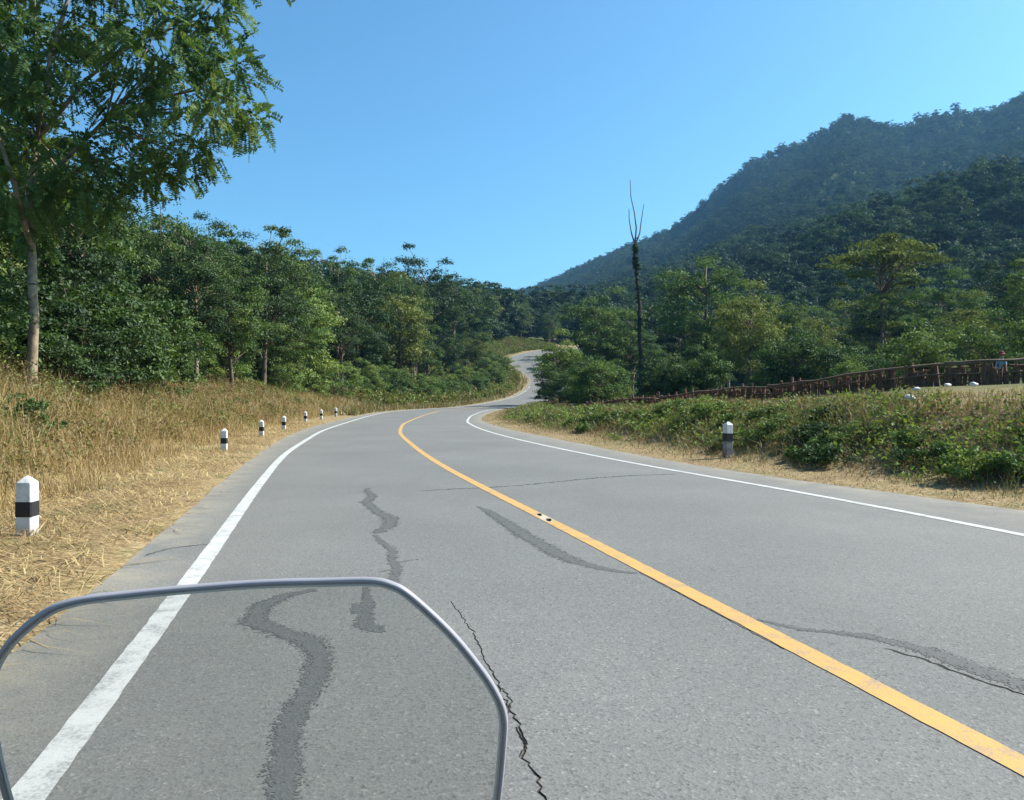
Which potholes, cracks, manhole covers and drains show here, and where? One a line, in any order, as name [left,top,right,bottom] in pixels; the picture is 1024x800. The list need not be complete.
crack [476,506,1024,695]
crack [423,474,667,491]
crack [450,601,547,800]
